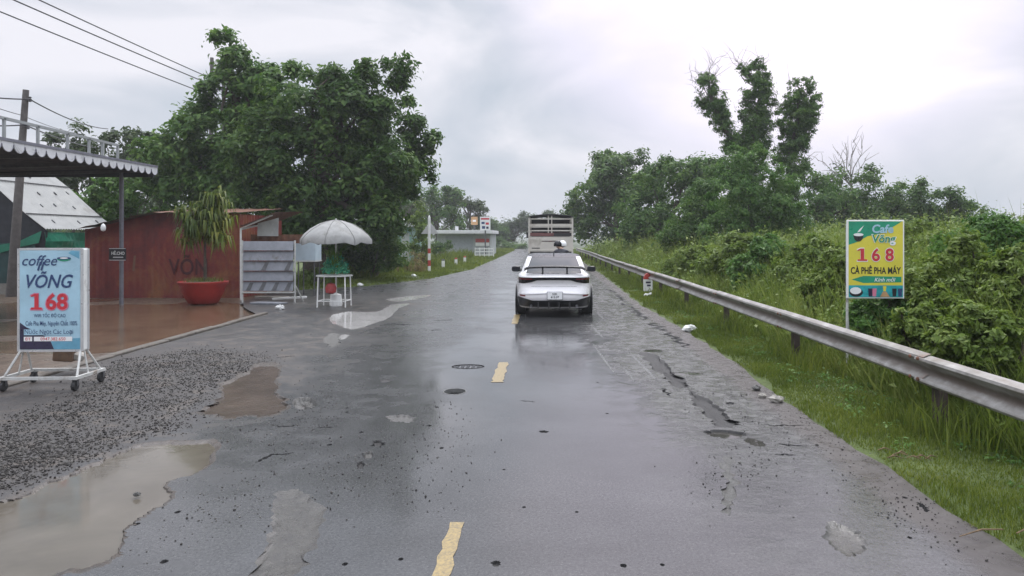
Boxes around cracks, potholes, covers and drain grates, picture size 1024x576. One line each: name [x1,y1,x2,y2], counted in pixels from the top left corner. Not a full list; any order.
pothole [638,352,690,389]
pothole [703,429,747,439]
pothole [0,438,221,576]
pothole [686,389,741,428]
pothole [196,362,291,420]
